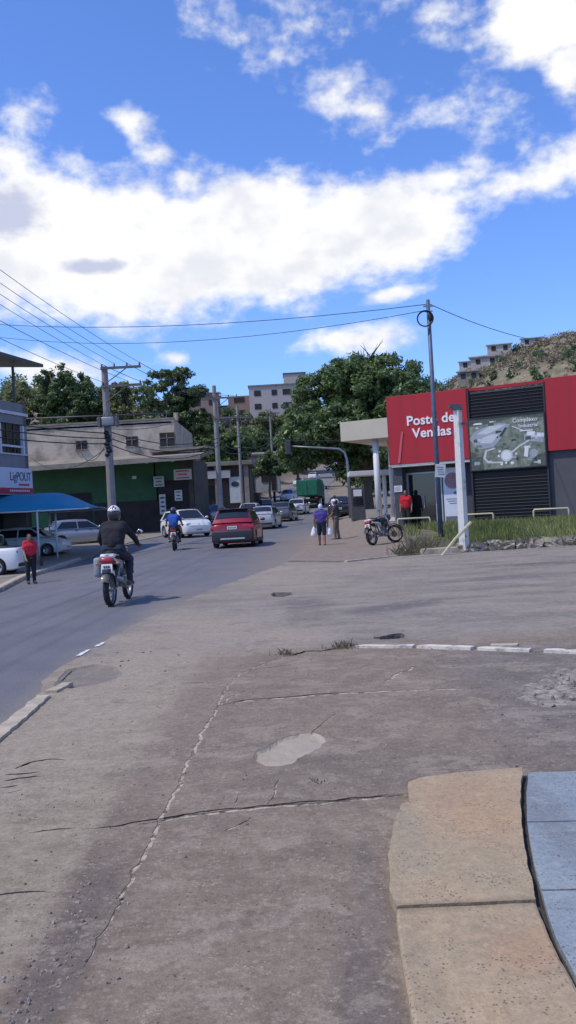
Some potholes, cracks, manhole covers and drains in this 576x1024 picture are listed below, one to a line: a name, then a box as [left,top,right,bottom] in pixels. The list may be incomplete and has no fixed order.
crack [84,648,480,966]
pothole [515,667,576,708]
